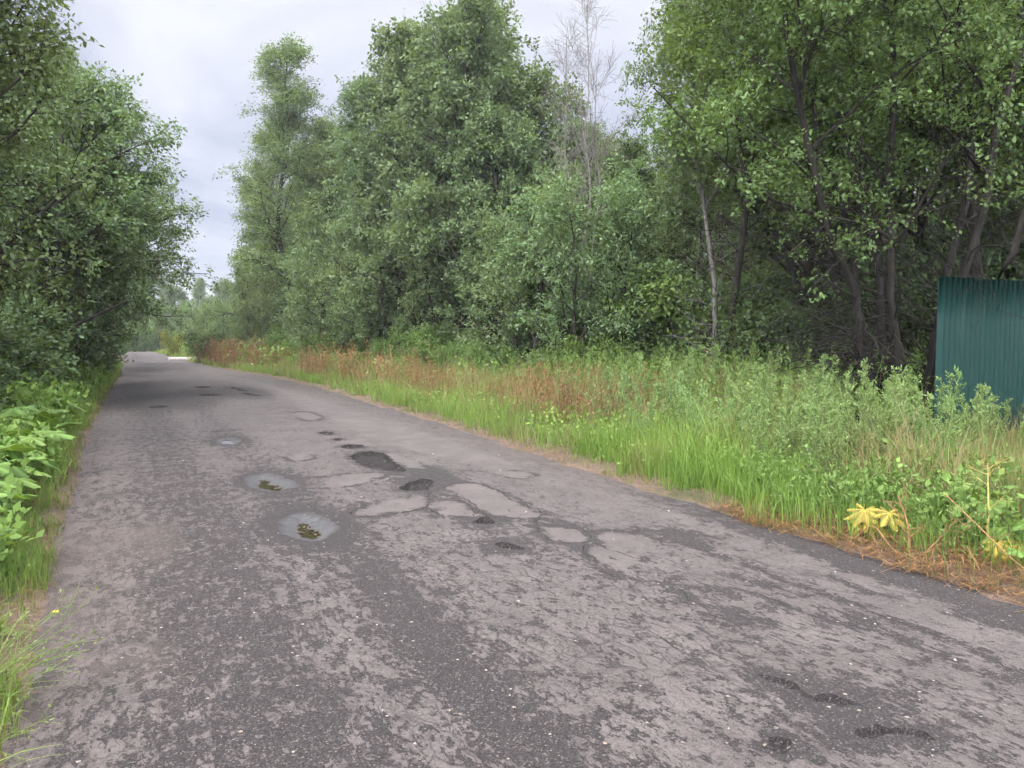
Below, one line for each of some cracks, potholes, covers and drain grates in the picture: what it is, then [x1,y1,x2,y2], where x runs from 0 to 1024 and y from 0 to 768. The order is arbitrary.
pothole [277,512,341,541]
pothole [758,673,862,707]
pothole [764,736,792,755]
pothole [854,724,936,741]
pothole [244,472,301,491]
pothole [495,542,526,550]
crack [350,470,644,579]
pothole [472,516,496,524]
pothole [399,478,435,491]
pothole [349,451,406,472]
